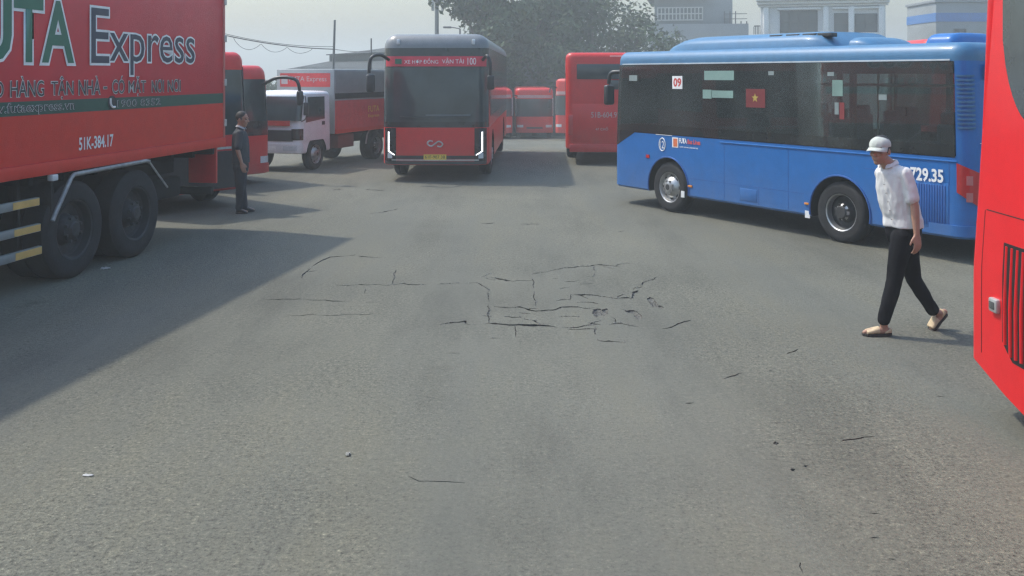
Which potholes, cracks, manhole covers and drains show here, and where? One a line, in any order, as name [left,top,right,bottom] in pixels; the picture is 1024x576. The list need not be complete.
crack [263,263,656,342]
crack [302,255,380,278]
